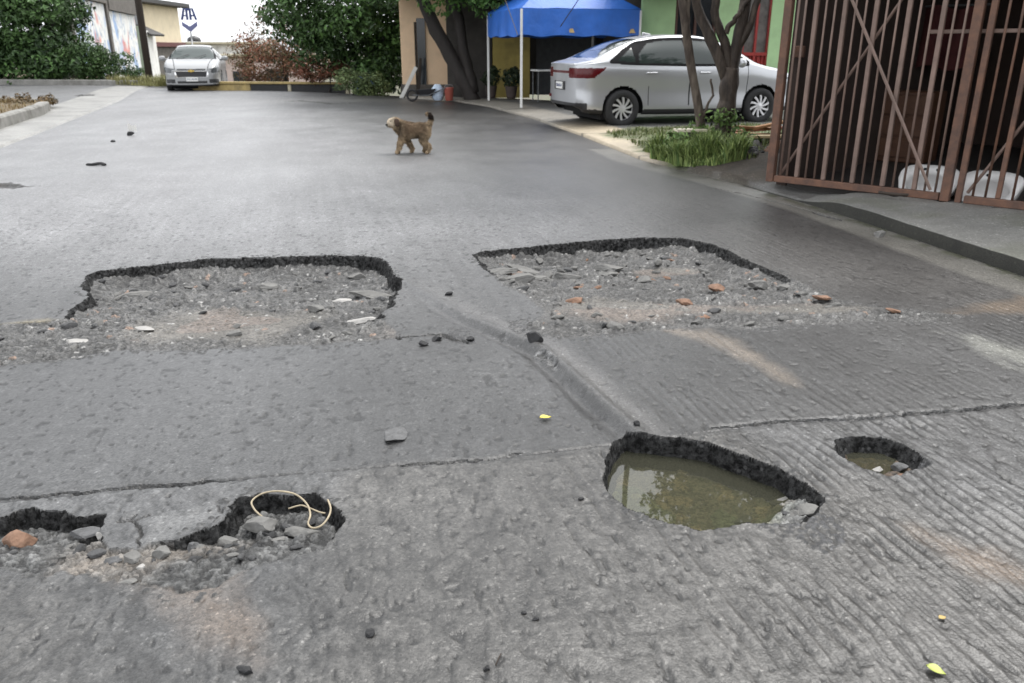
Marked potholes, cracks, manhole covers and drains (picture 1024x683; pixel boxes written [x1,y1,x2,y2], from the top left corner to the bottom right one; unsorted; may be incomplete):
crack [398,452,523,467]
crack [711,403,1024,429]
pothole [0,254,404,367]
pothole [833,435,934,477]
pothole [0,492,346,596]
pothole [472,237,965,339]
pothole [602,430,826,531]
